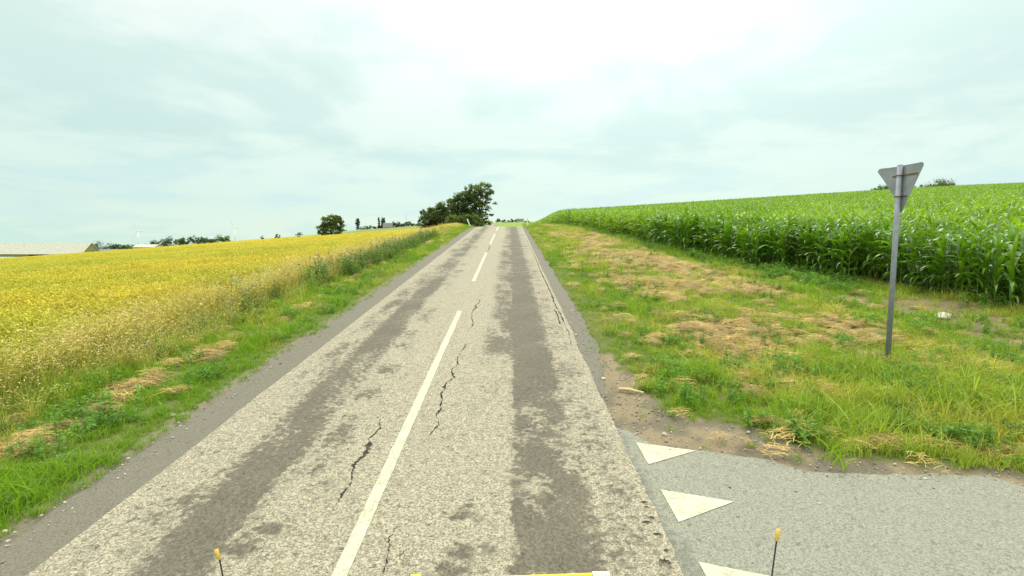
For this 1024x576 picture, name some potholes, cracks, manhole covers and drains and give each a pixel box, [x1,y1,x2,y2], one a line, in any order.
crack [526,239,572,346]
crack [331,417,383,512]
crack [383,524,405,573]
crack [430,344,466,435]
